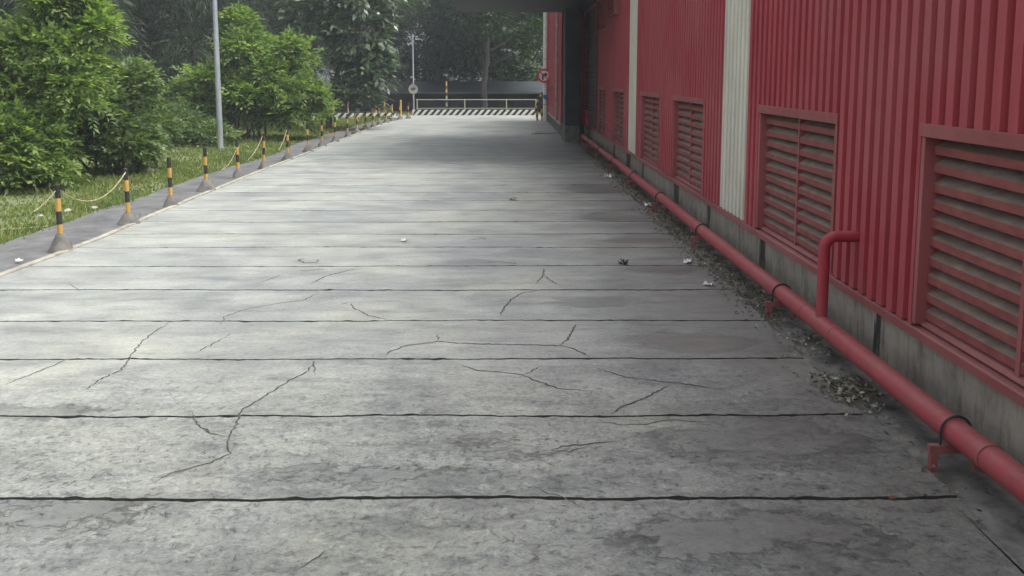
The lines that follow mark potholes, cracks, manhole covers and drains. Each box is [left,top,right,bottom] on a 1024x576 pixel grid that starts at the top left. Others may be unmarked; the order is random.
crack [383,324,718,452]
crack [500,268,559,315]
crack [87,323,168,389]
crack [157,361,316,481]
